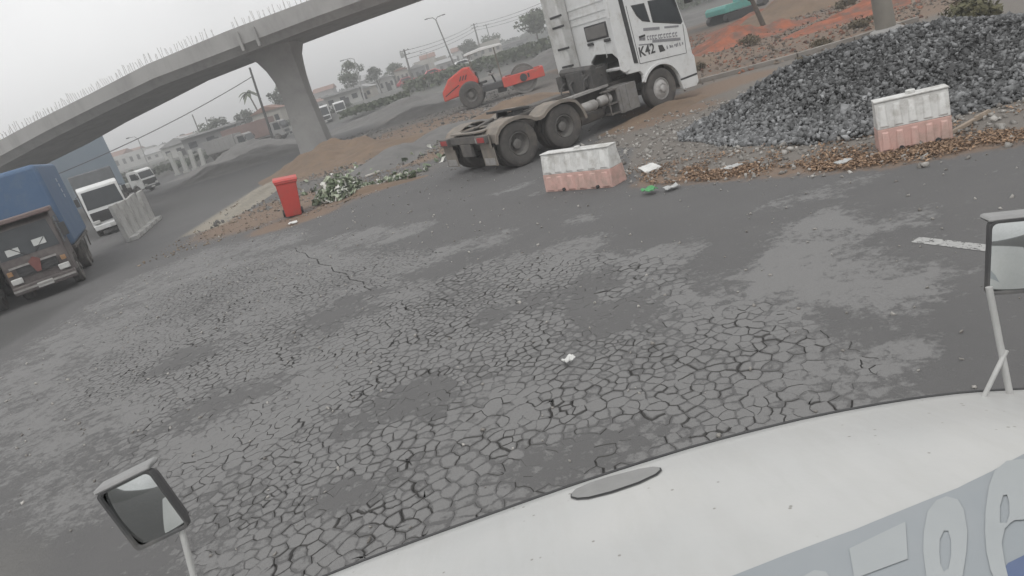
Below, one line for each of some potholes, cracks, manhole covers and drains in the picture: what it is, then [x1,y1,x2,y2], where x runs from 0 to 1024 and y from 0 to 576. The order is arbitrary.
crack [59,246,882,576]
